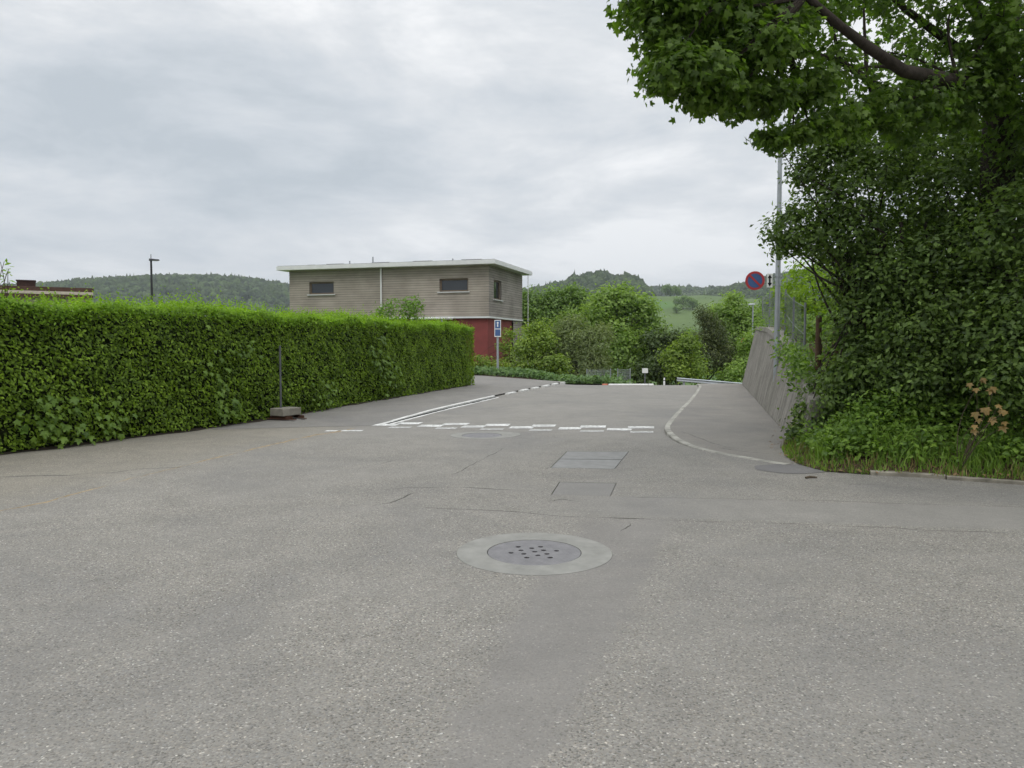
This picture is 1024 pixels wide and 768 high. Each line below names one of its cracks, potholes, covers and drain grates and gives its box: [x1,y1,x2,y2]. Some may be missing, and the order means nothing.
manhole cover [457,533,612,575]
crack [426,499,1000,533]
manhole cover [451,431,520,439]
crack [339,452,523,507]
manhole cover [551,451,628,469]
